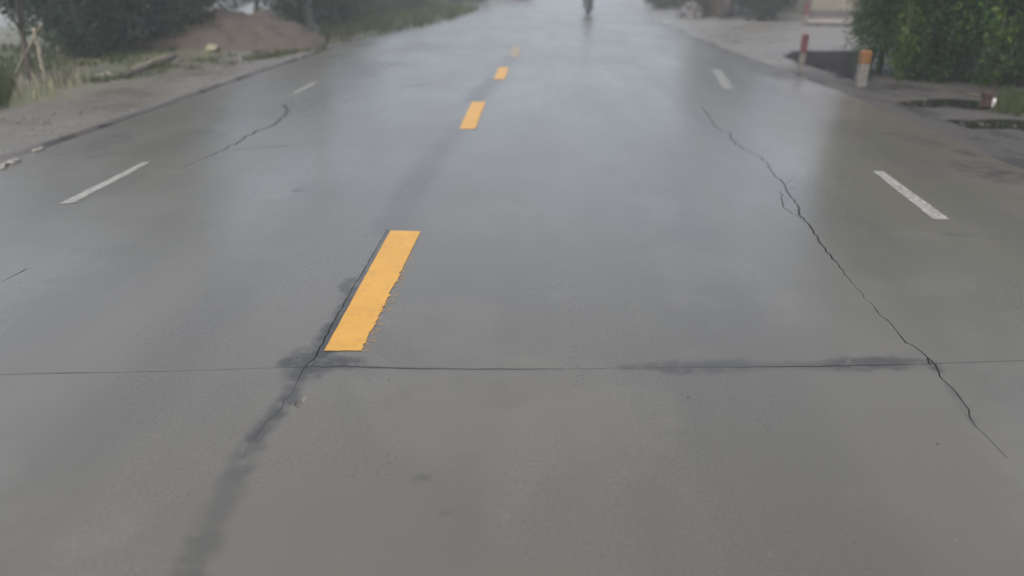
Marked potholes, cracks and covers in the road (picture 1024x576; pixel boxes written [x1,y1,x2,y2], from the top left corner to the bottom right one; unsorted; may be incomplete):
crack [3,107,1024,458]
